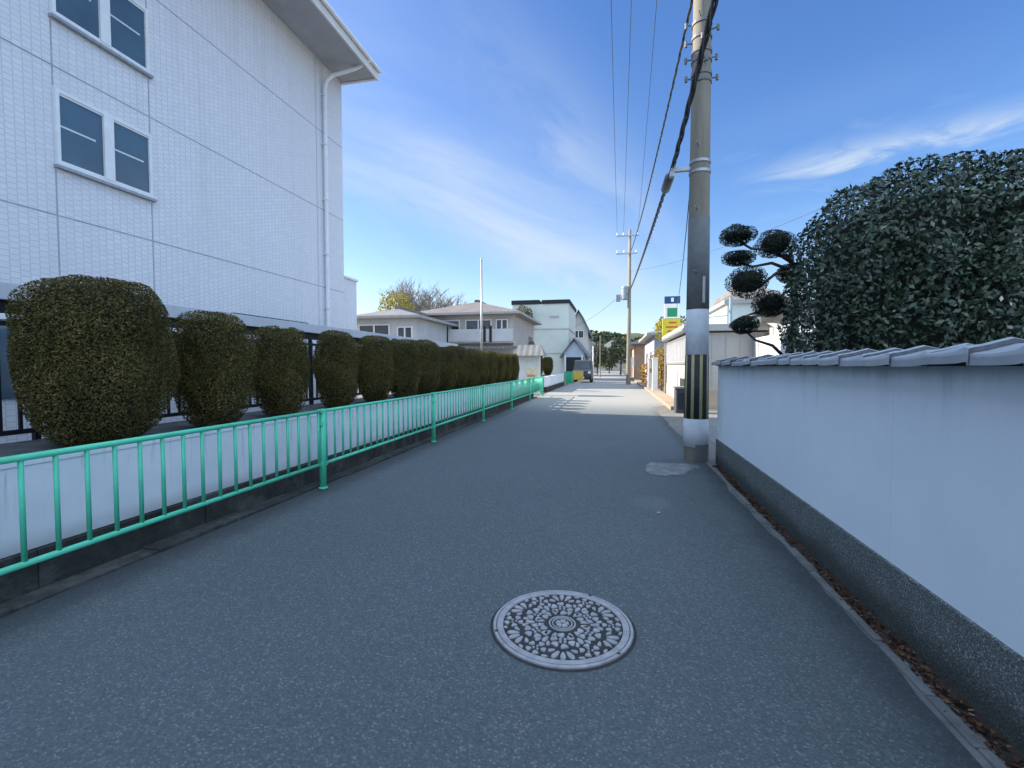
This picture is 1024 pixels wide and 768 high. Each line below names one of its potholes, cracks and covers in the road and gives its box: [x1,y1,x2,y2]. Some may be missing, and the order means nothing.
manhole cover [490,590,637,672]
